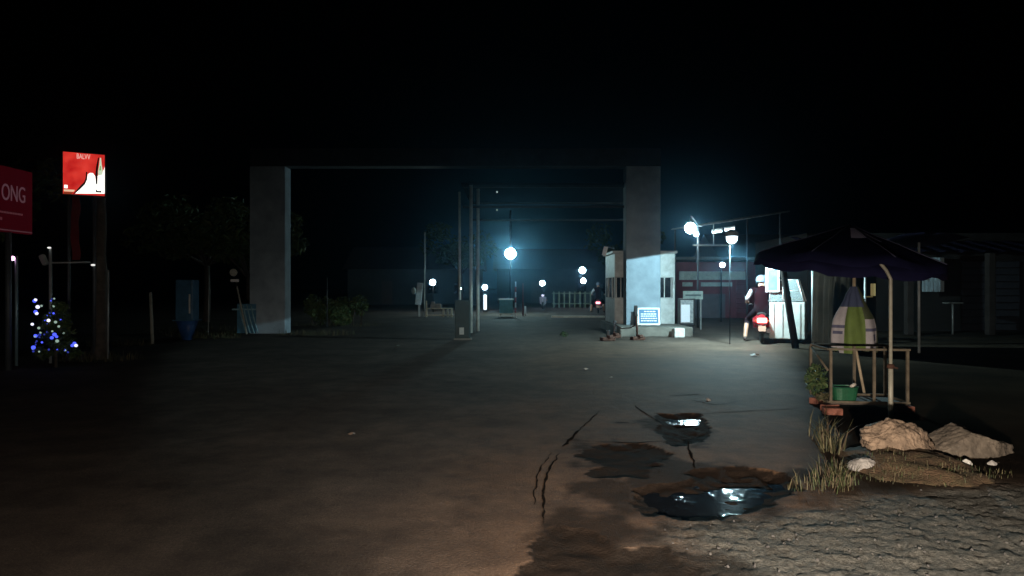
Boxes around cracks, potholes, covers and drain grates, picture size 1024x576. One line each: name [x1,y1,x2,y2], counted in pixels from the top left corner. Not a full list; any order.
pothole [651,413,715,447]
pothole [572,443,677,479]
crack [533,405,696,523]
pothole [626,464,809,522]
